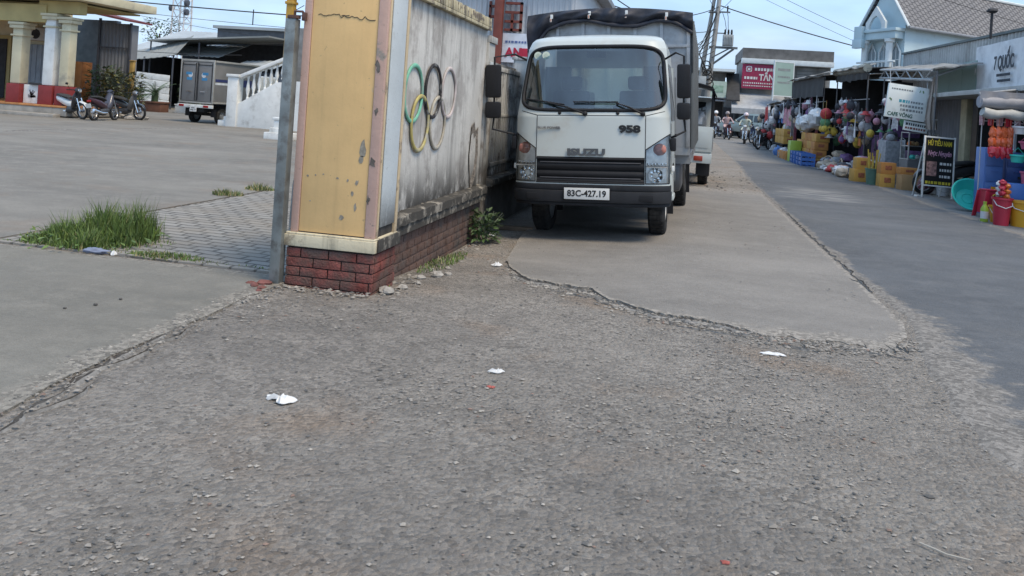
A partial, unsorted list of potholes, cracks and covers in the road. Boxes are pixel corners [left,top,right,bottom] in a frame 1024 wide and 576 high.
crack [780,207,873,293]
crack [0,291,272,434]
